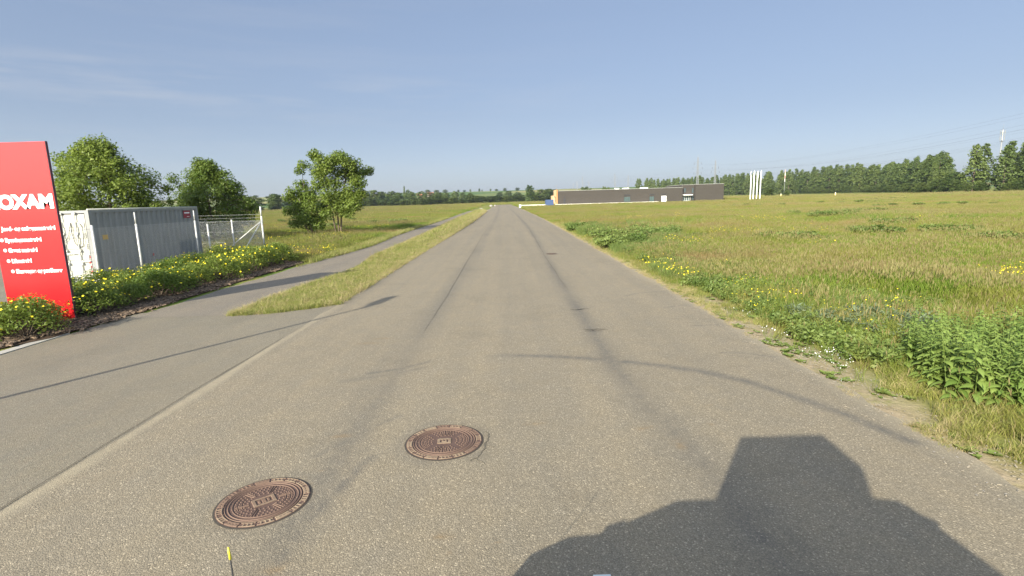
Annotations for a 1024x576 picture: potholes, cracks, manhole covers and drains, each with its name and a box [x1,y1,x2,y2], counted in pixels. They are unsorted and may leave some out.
manhole cover [212,477,313,530]
manhole cover [404,425,484,461]
